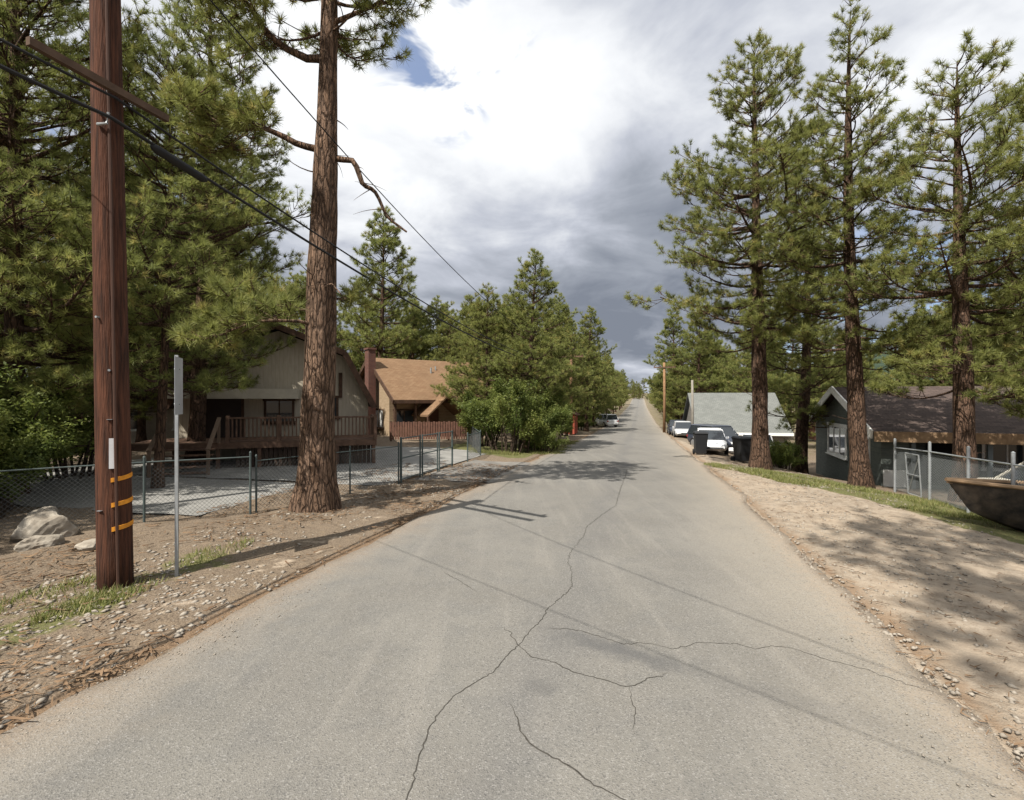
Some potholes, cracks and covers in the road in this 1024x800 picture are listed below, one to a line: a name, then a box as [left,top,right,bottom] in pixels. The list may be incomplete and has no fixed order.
crack [406,470,936,800]
